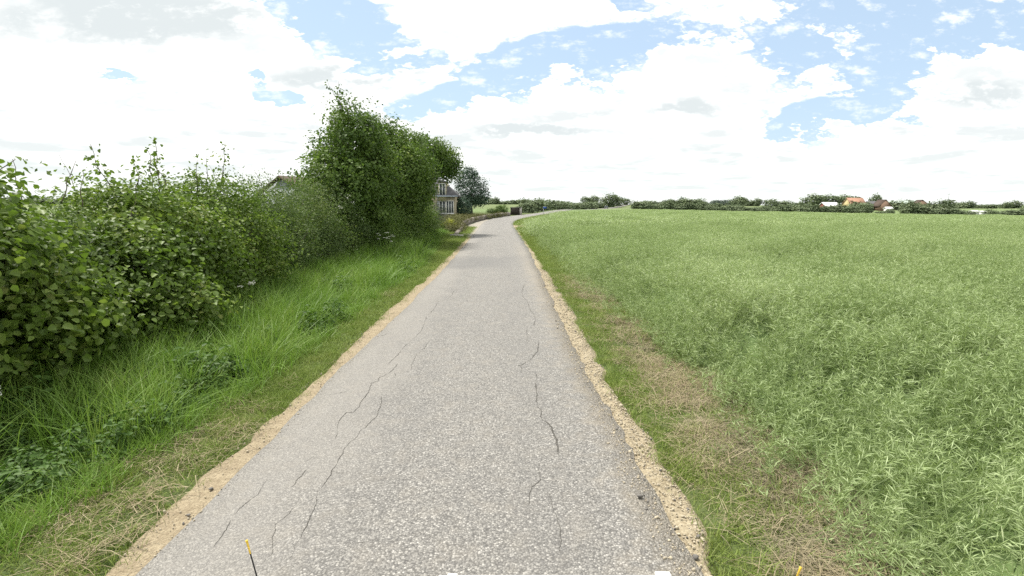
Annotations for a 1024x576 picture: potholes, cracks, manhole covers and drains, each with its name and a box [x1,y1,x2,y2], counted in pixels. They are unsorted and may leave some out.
crack [260,291,454,565]
crack [521,284,562,552]
